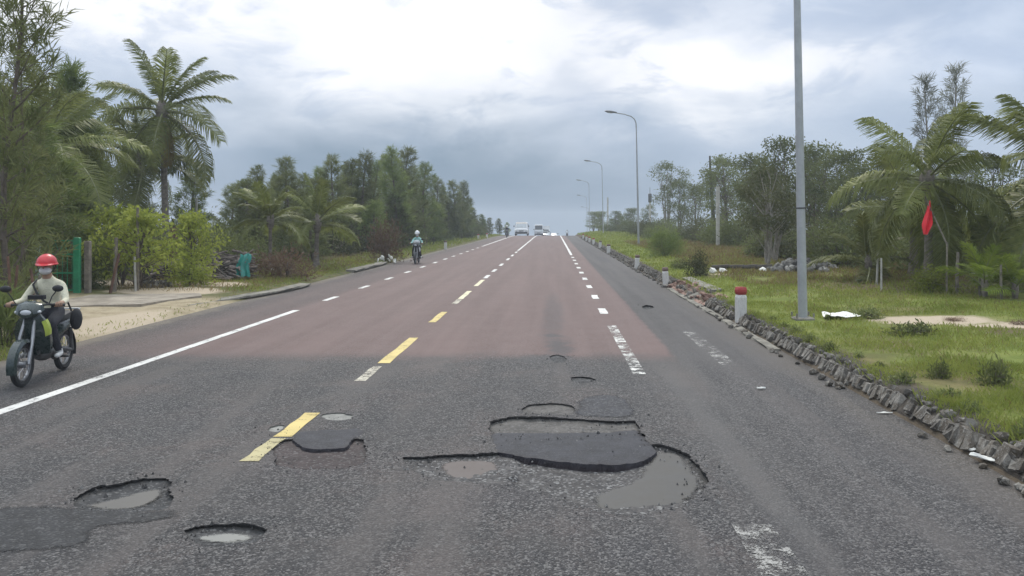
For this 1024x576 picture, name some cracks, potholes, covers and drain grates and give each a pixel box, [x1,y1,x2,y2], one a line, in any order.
pothole [403,444,709,515]
pothole [321,412,353,421]
pothole [521,403,576,415]
pothole [184,523,267,546]
pothole [272,438,368,470]
pothole [72,478,174,512]
